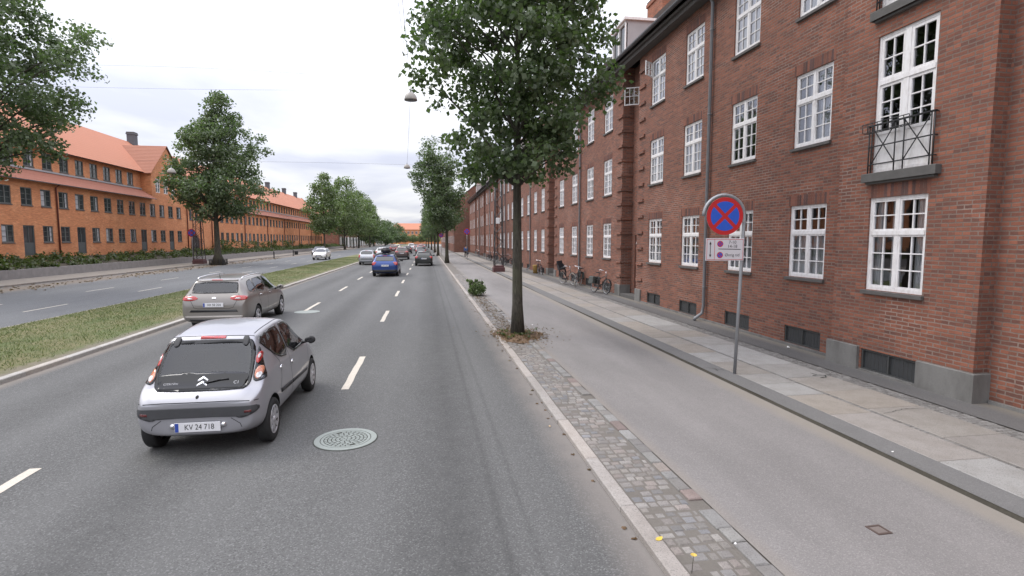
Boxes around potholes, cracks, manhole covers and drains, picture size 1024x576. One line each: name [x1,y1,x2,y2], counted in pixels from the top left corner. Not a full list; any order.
manhole cover [313,428,378,451]
utility cover [865,524,893,535]
